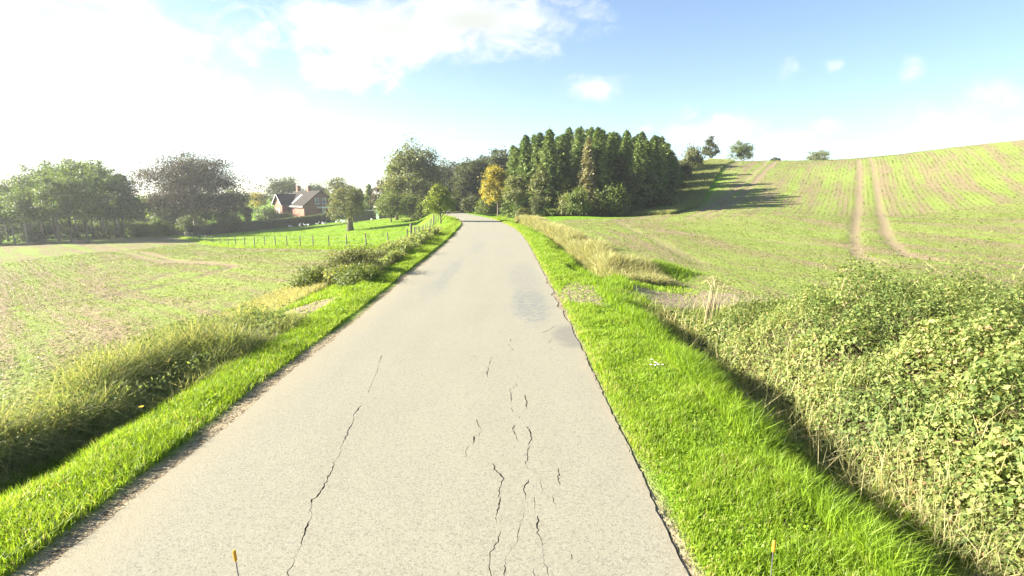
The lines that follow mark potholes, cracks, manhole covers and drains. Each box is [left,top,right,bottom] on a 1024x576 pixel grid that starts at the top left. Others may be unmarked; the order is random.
crack [489,385,560,576]
crack [287,356,382,576]
